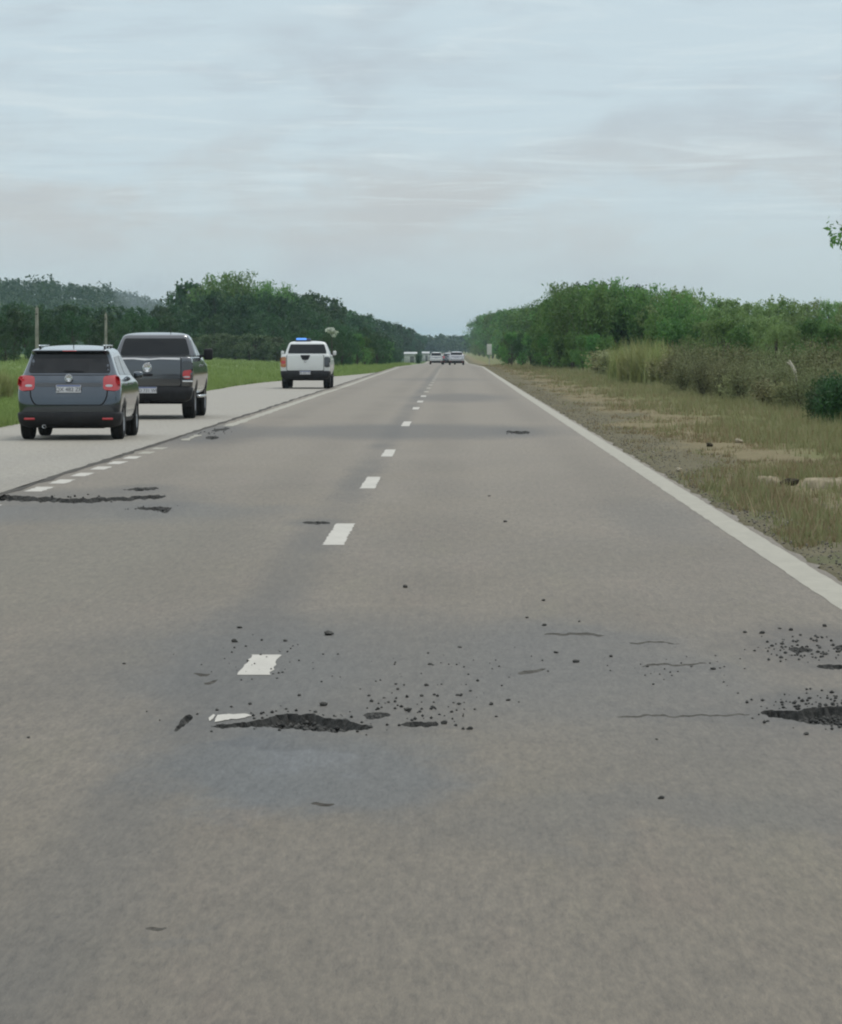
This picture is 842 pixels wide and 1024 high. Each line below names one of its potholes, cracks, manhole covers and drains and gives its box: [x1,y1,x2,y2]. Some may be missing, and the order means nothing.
pothole [761,706,842,725]
pothole [174,714,193,732]
pothole [211,713,369,733]
